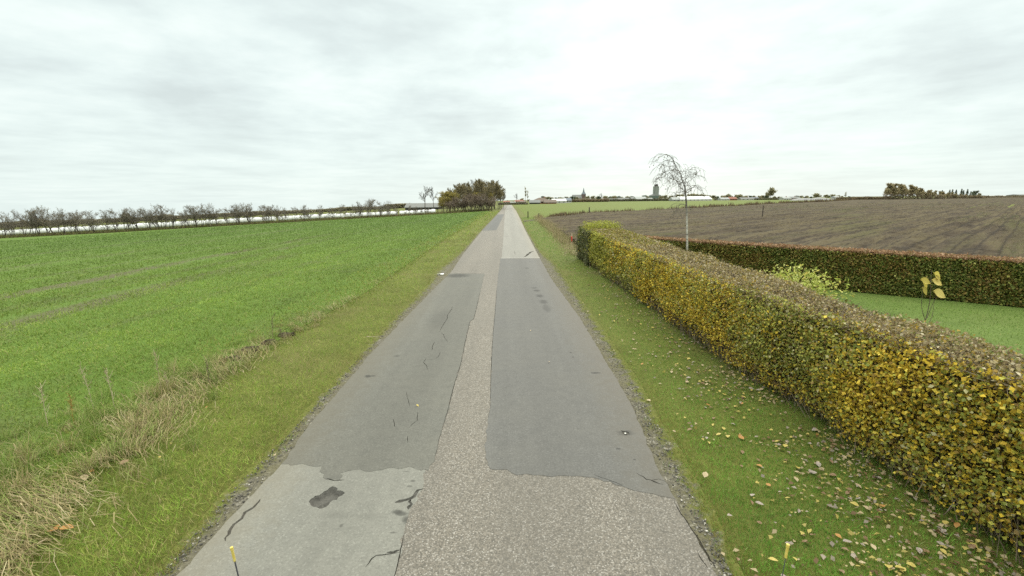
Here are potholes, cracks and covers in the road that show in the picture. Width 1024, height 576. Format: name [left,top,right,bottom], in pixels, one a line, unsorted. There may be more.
crack [225,500,260,541]
pothole [309,487,344,509]
crack [395,489,422,510]
crack [423,291,497,455]
crack [368,536,404,576]
